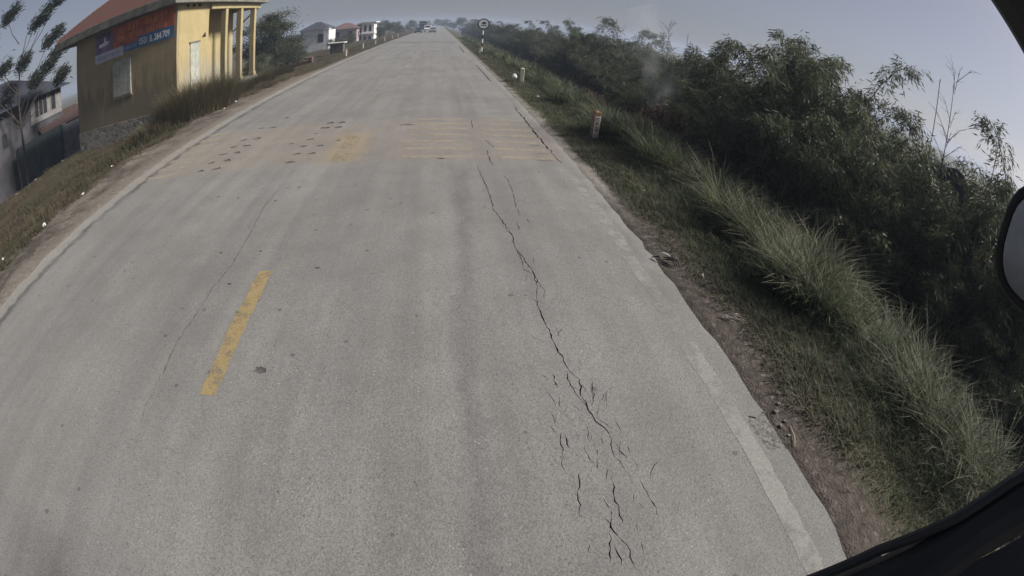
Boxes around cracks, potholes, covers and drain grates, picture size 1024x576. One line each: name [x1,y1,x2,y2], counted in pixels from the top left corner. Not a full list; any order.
crack [514,106,562,164]
crack [141,182,284,422]
crack [471,120,659,566]
